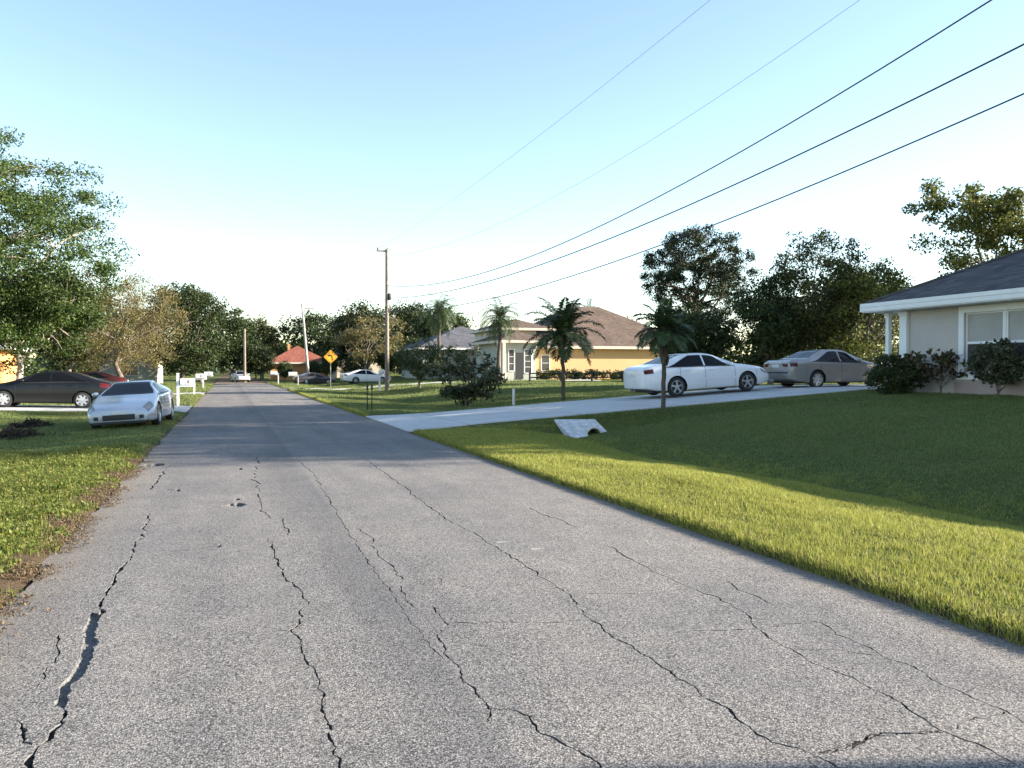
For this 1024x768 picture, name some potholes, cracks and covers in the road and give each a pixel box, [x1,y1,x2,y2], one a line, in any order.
crack [357,528,415,608]
crack [162,456,342,768]
crack [367,459,1023,768]
crack [19,514,217,768]
